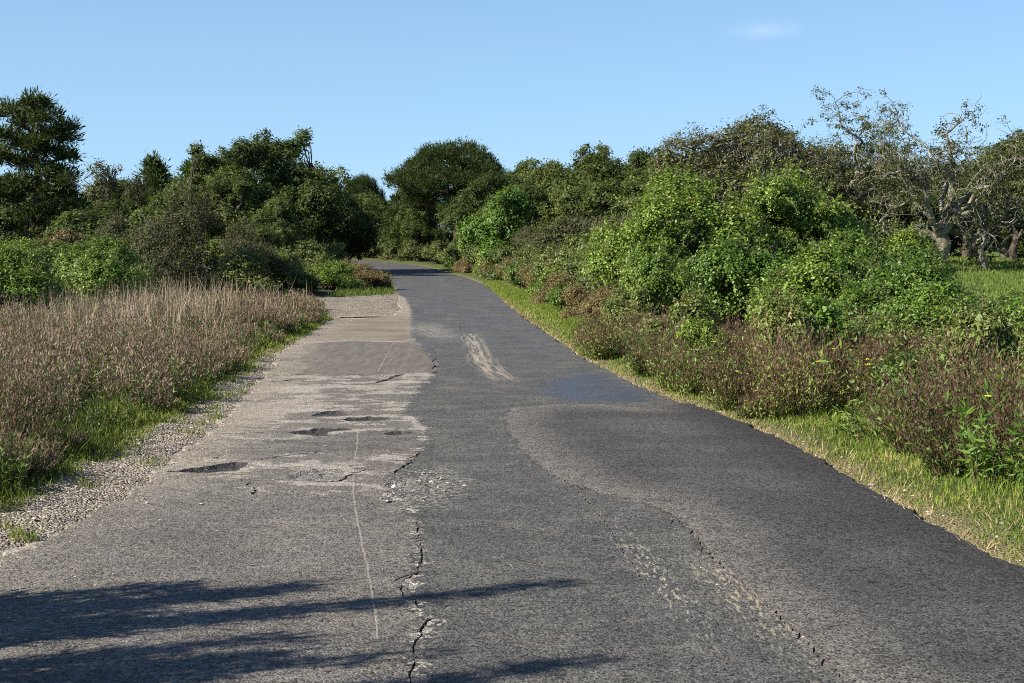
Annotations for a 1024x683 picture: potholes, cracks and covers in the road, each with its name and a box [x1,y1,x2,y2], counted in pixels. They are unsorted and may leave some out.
crack [318,453,421,482]
pothole [167,462,248,473]
crack [393,518,431,683]
crack [531,459,844,683]
pothole [287,428,352,436]
